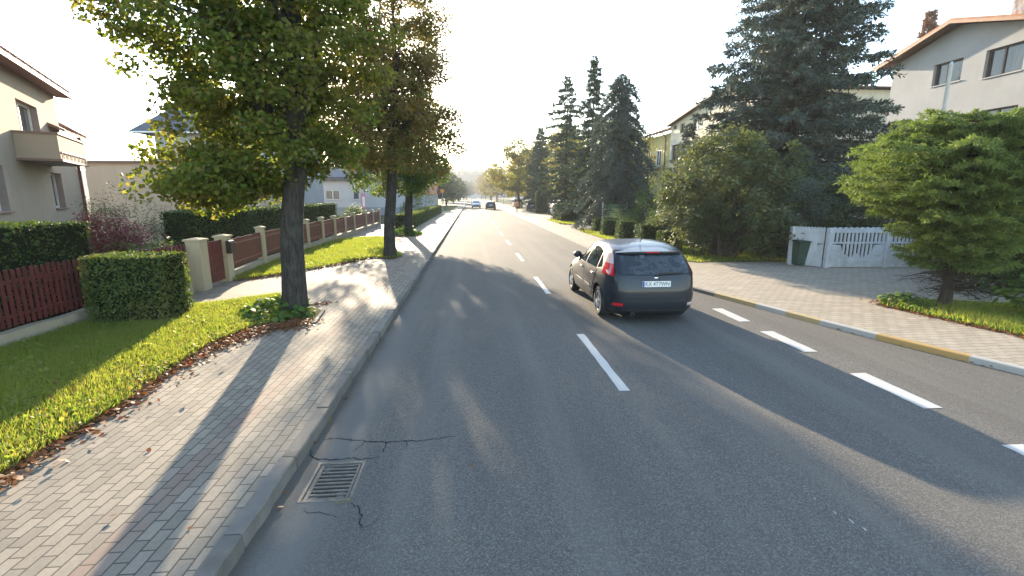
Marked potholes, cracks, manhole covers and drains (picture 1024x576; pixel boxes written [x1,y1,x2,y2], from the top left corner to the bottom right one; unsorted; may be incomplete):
crack [303,502,380,530]
crack [310,436,455,461]
drain grate [296,461,366,503]
